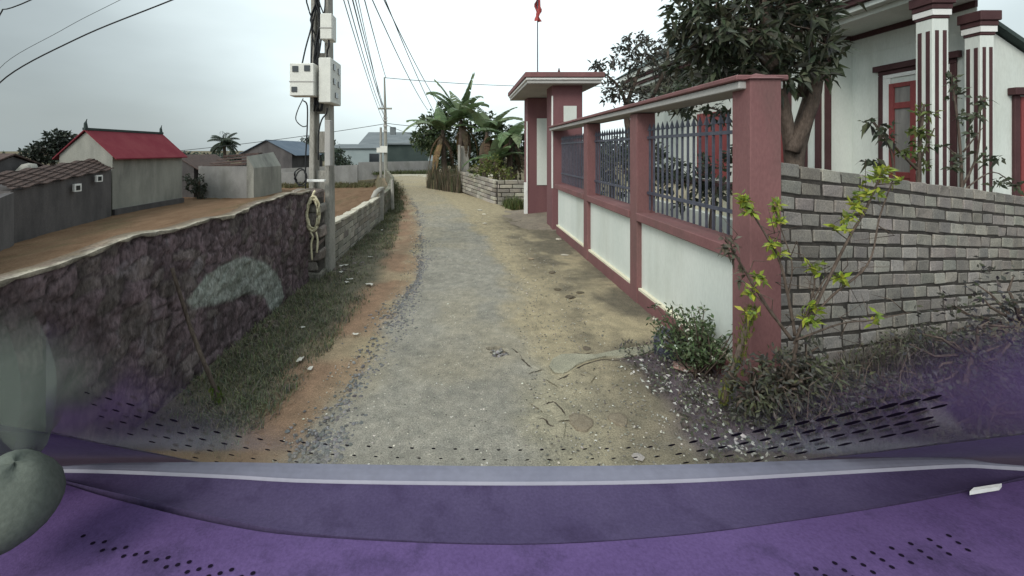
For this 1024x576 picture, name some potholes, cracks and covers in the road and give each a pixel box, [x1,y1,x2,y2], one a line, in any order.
crack [502,344,650,438]
